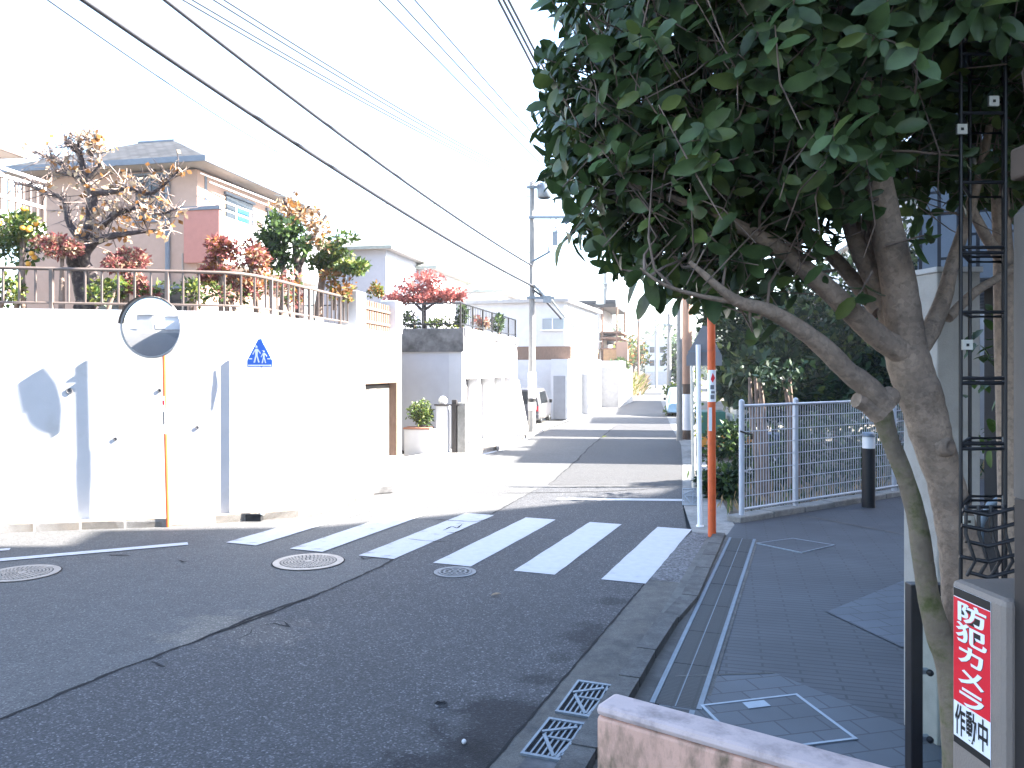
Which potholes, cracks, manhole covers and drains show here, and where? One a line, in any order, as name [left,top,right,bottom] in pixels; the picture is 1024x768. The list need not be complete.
manhole cover [433,566,477,578]
drain grate [520,717,584,762]
utility cover [700,693,858,746]
drain grate [555,679,611,718]
manhole cover [271,553,345,570]
manhole cover [0,564,63,582]
utility cover [757,538,835,553]
